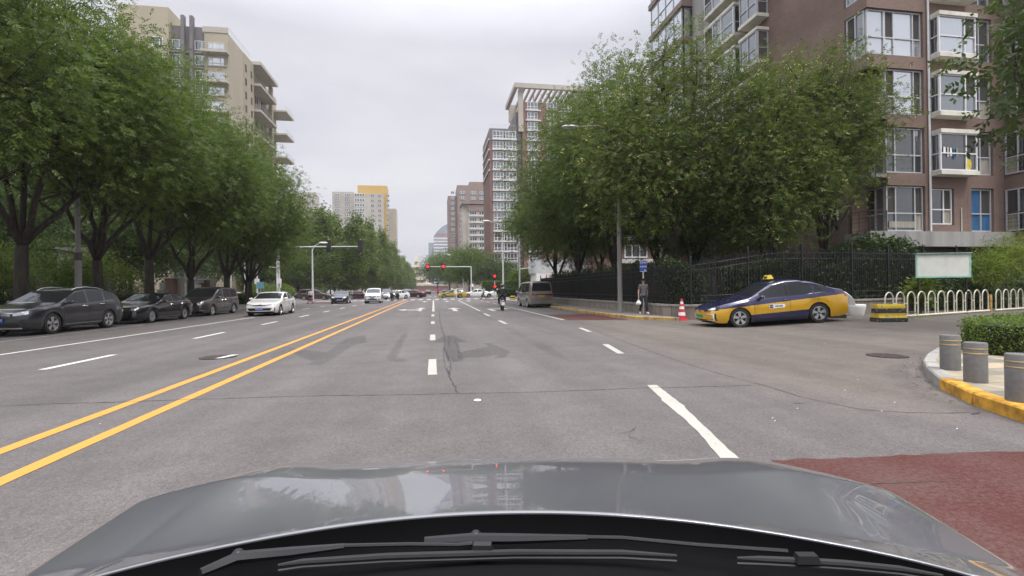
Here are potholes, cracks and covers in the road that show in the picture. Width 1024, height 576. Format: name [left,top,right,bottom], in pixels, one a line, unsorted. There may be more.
crack [439,311,460,394]
